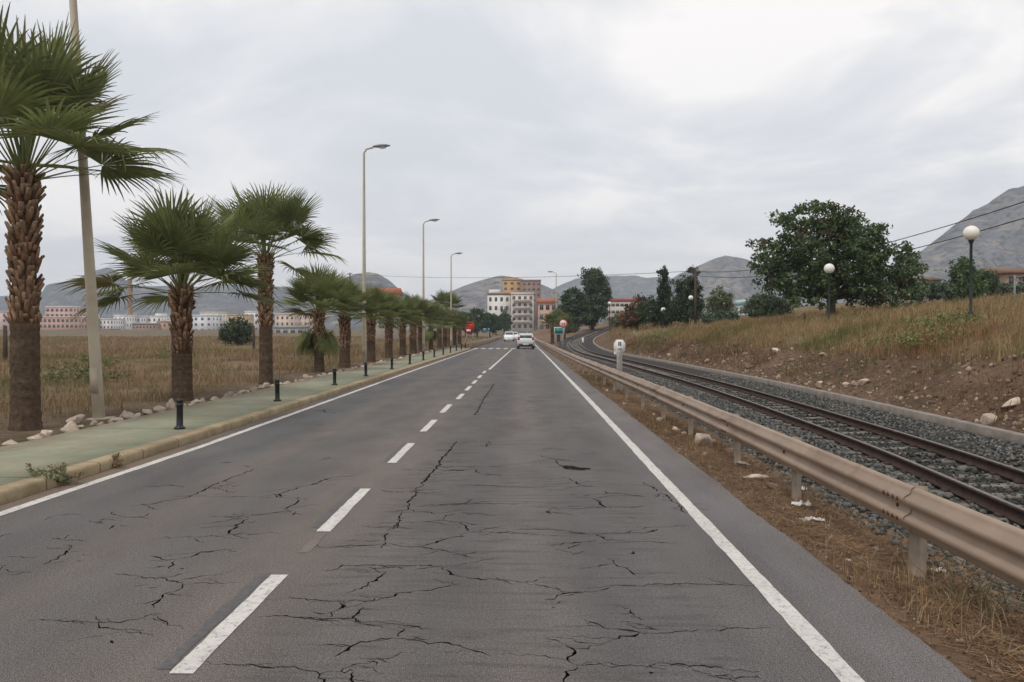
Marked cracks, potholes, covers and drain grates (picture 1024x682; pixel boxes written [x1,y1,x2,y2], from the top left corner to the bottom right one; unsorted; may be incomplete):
crack [207,441,751,682]
crack [459,384,500,415]
crack [31,457,348,643]
